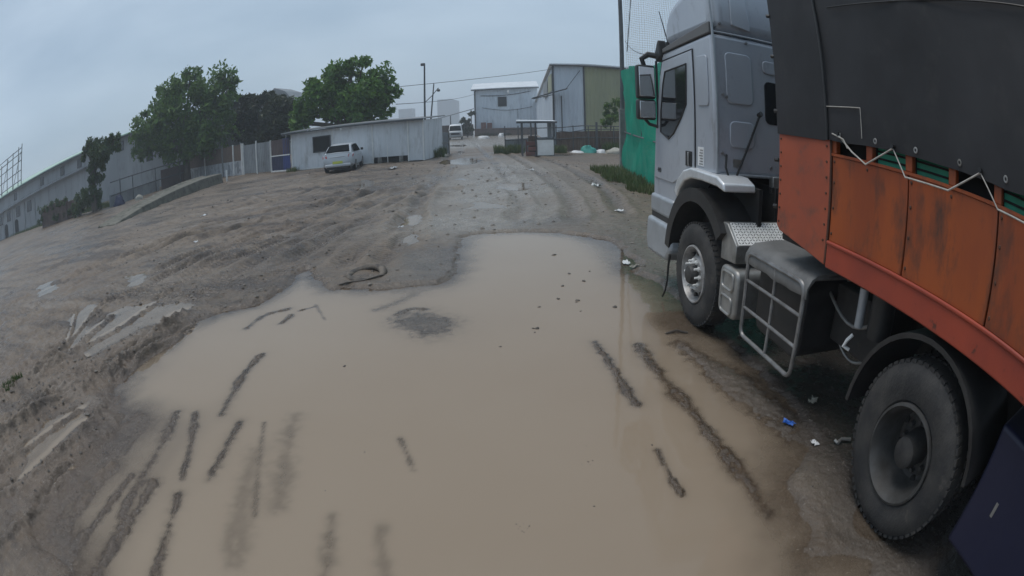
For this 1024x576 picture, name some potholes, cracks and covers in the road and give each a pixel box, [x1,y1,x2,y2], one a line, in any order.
pothole [15,227,900,576]
